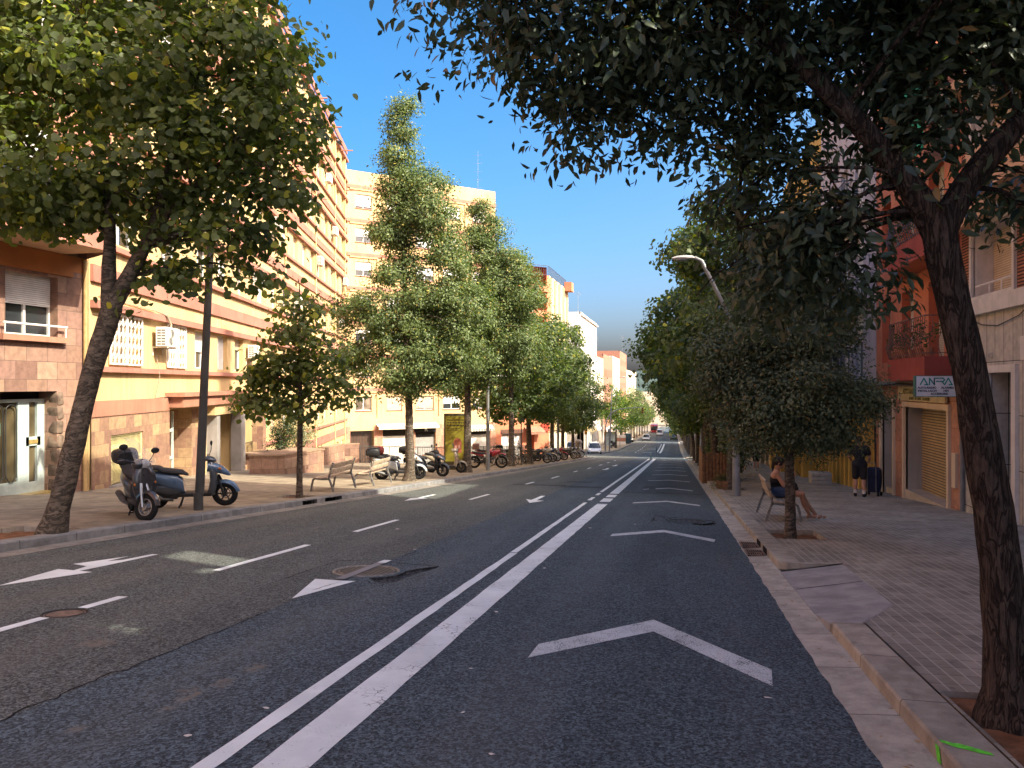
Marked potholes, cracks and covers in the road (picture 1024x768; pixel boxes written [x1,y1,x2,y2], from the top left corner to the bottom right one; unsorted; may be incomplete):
manhole cover [39,608,89,618]
drain grate [744,545,767,556]
drain grate [739,539,760,549]
manhole cover [332,565,400,577]
